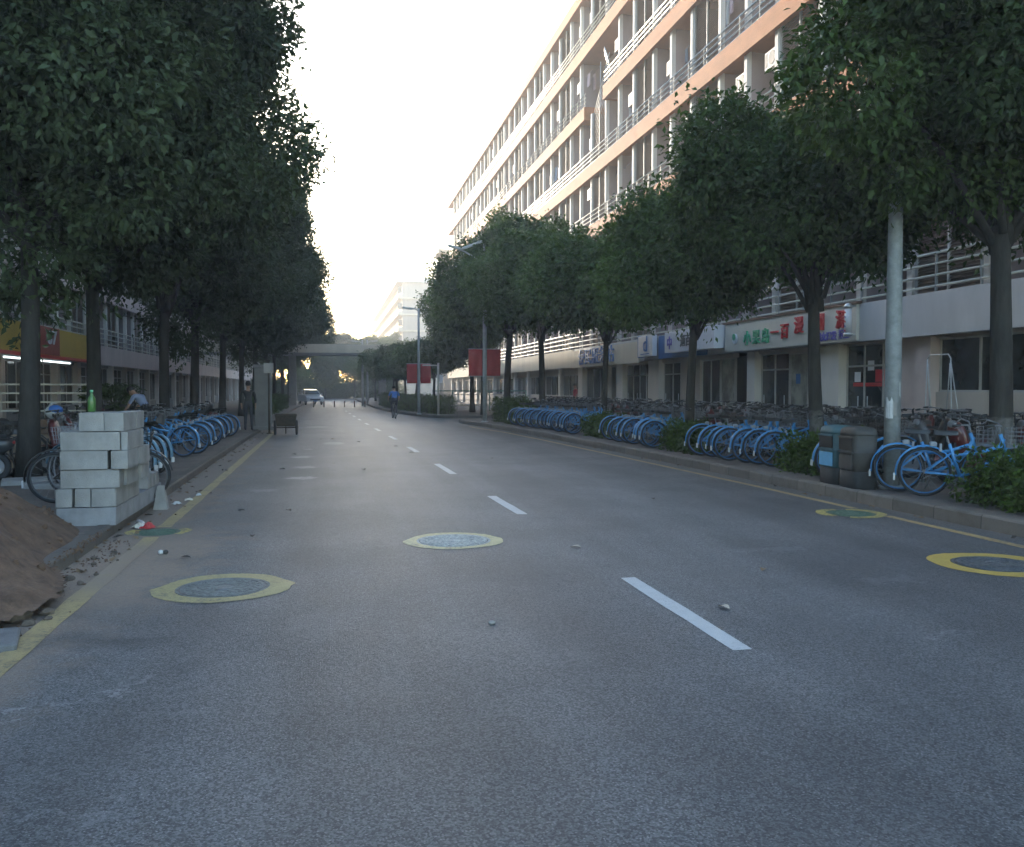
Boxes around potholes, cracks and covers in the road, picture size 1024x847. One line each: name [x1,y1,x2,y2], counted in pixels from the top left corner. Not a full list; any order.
manhole cover [816,509,887,518]
manhole cover [125,528,192,536]
manhole cover [403,532,503,549]
manhole cover [926,553,1024,577]
manhole cover [149,573,295,603]
